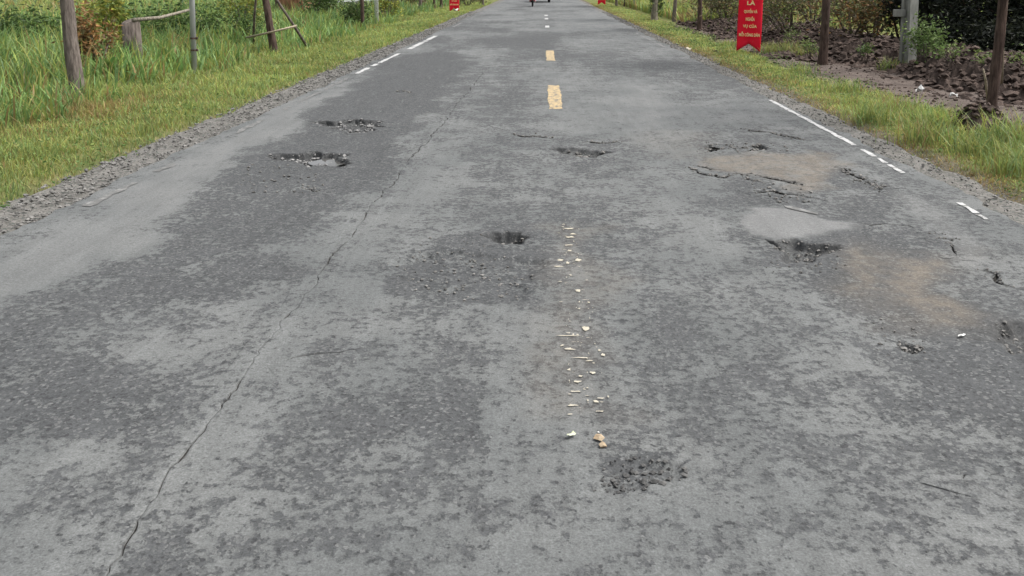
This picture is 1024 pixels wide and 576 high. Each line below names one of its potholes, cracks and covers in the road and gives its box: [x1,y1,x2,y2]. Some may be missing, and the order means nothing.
pothole [567,441,717,512]
pothole [257,149,361,170]
crack [675,128,900,202]
pothole [466,227,545,249]
pothole [538,146,624,160]
crack [74,71,626,576]
pothole [751,233,859,269]
pothole [301,118,393,135]
